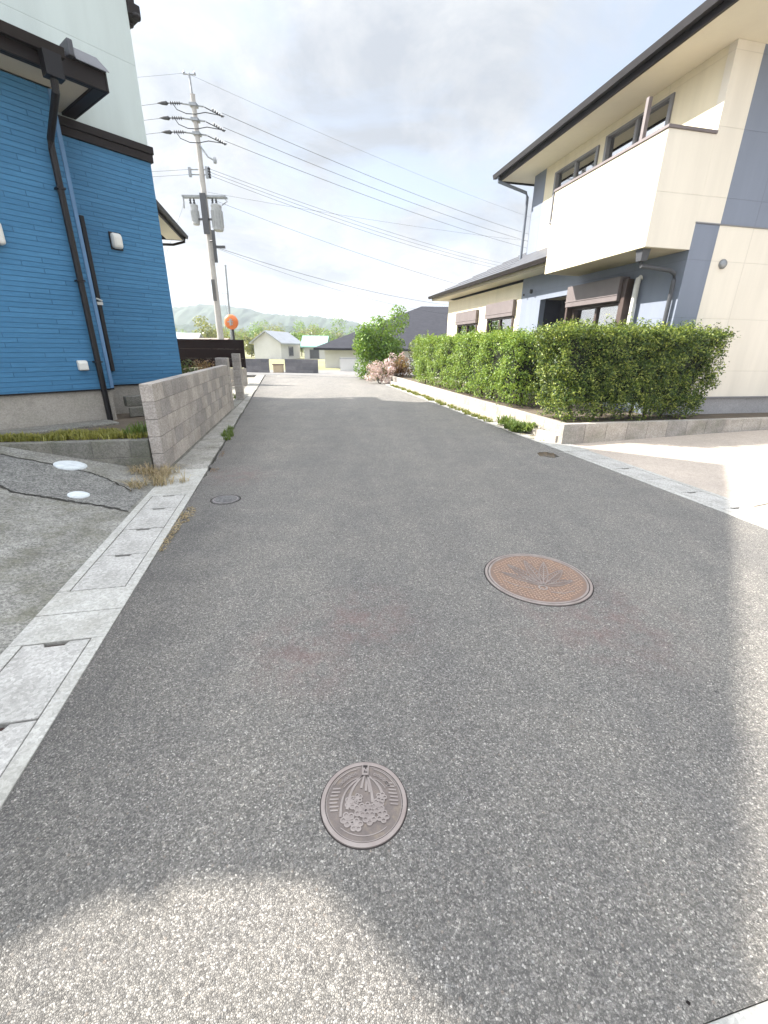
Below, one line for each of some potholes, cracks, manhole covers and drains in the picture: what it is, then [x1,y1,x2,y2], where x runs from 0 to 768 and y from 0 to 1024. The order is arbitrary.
manhole cover [210,495,241,505]
manhole cover [484,554,594,607]
manhole cover [320,762,408,850]
